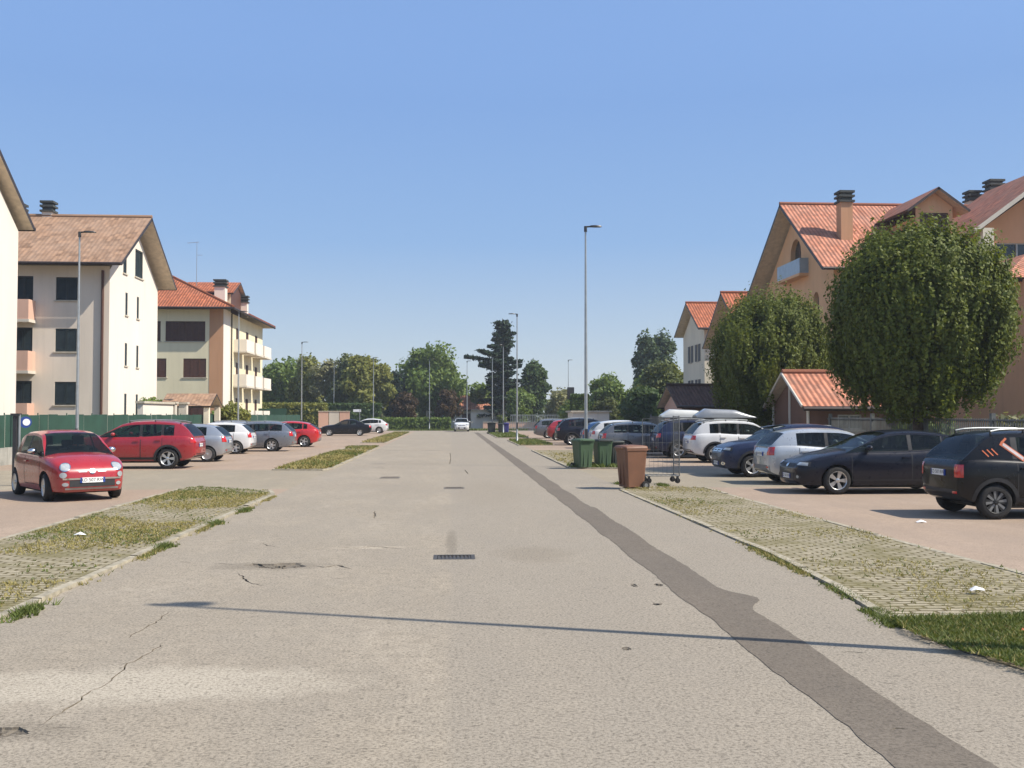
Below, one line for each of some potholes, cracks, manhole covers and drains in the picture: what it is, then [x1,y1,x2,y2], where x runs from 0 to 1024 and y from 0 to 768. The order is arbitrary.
crack [46,613,168,729]
pothole [0,727,30,738]
